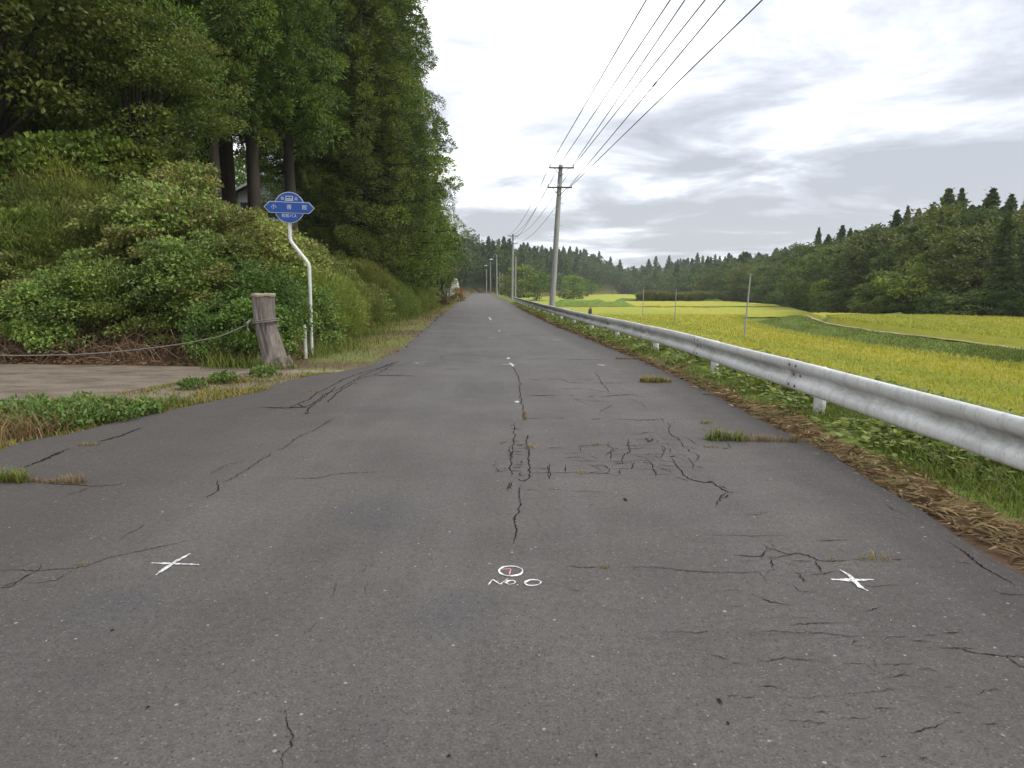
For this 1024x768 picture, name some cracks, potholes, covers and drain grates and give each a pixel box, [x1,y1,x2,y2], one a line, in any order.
crack [570,535,1024,723]
crack [281,710,294,766]
crack [492,359,729,542]
crack [3,524,183,587]
crack [207,362,404,498]
